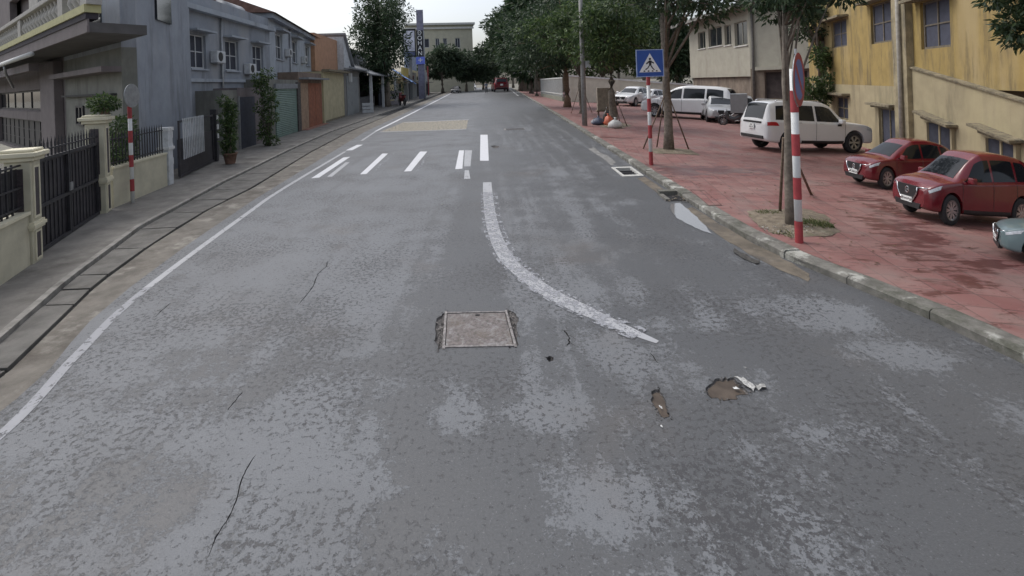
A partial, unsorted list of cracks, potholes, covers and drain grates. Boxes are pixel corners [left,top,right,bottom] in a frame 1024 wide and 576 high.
drain grate [657,189,687,202]
pothole [647,387,672,420]
crack [206,456,255,560]
pothole [704,375,752,404]
manhole cover [442,310,517,349]
drain grate [611,166,644,177]
